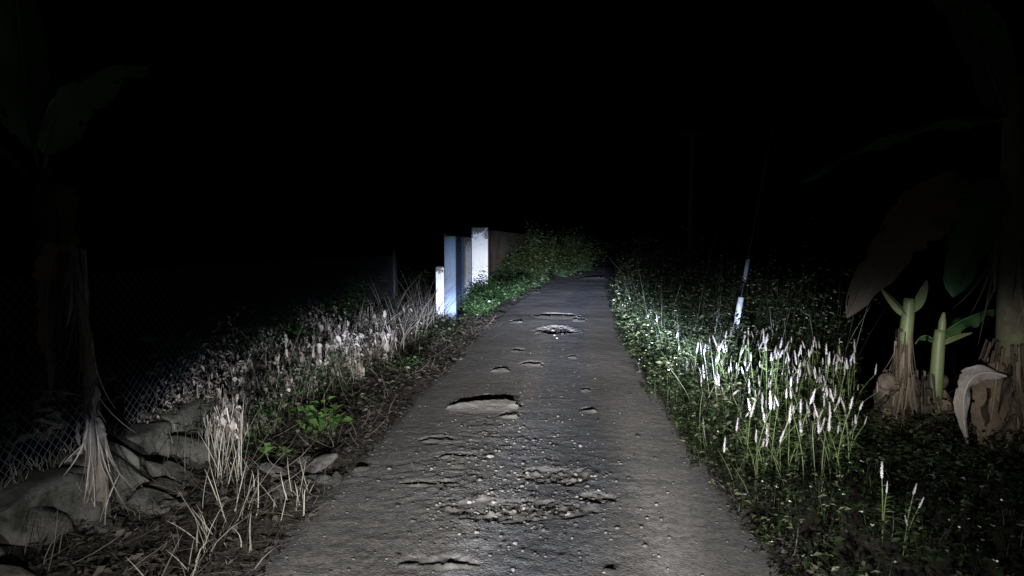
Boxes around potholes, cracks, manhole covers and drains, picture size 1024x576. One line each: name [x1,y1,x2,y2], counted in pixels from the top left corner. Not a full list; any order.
pothole [402,479,461,488]
pothole [436,451,478,460]
pothole [447,394,521,413]
pothole [420,435,456,443]
pothole [535,325,579,335]
pothole [515,465,591,486]
pothole [573,492,617,504]
pothole [434,497,600,525]
pothole [397,553,481,571]
